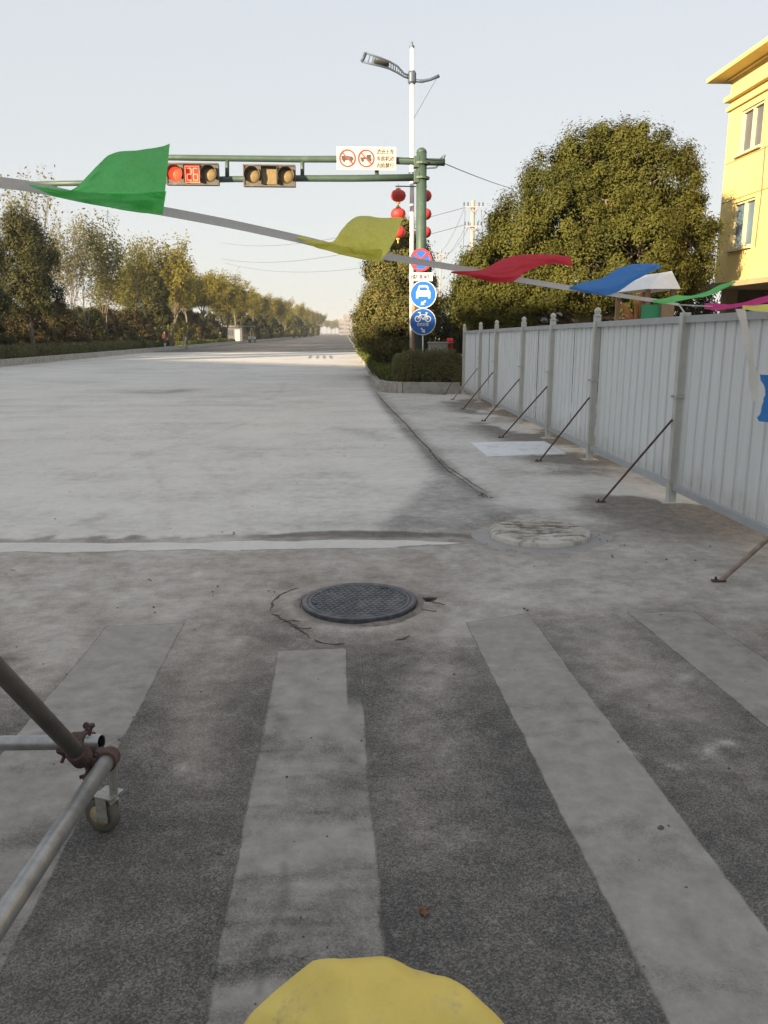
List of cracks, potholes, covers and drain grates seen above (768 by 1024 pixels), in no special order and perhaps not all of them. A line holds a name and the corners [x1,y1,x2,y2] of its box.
manhole cover [294,583,425,627]
manhole cover [471,518,613,553]
